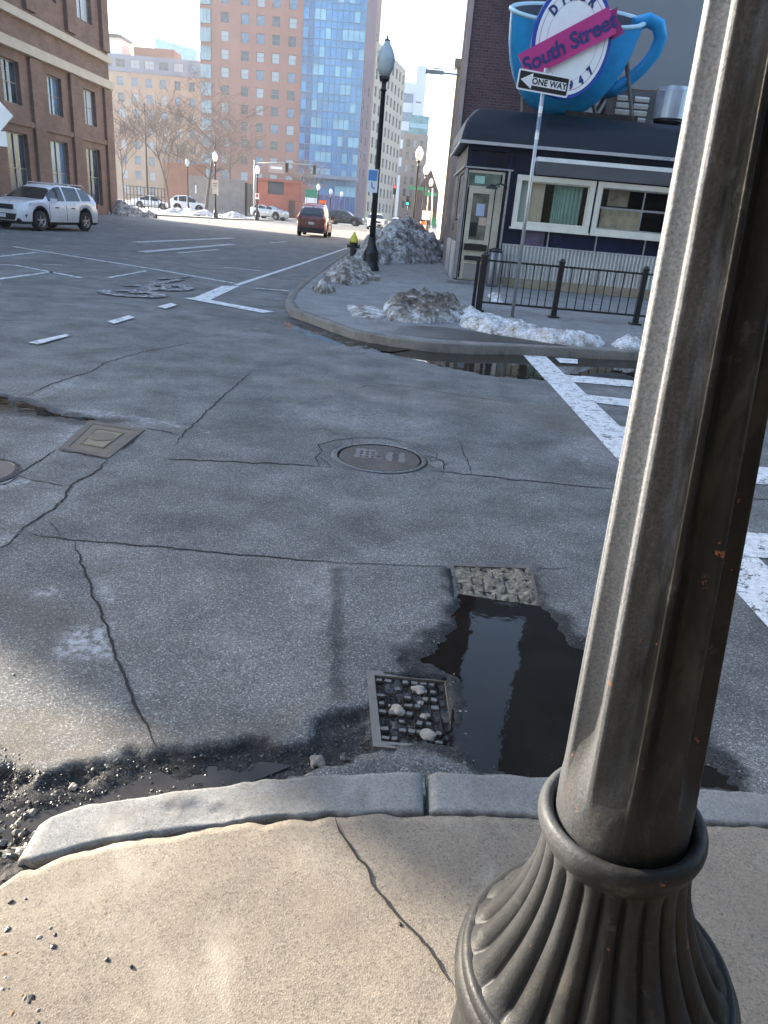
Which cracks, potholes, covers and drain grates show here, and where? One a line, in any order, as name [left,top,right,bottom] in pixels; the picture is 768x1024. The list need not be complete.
crack [335,818,450,982]
utility cover [59,421,145,458]
crack [0,433,446,746]
manhole cover [0,458,22,483]
drain grate [447,562,538,606]
manhole cover [331,443,428,475]
crack [29,341,200,395]
crack [173,371,252,446]
drain grate [366,670,451,751]
